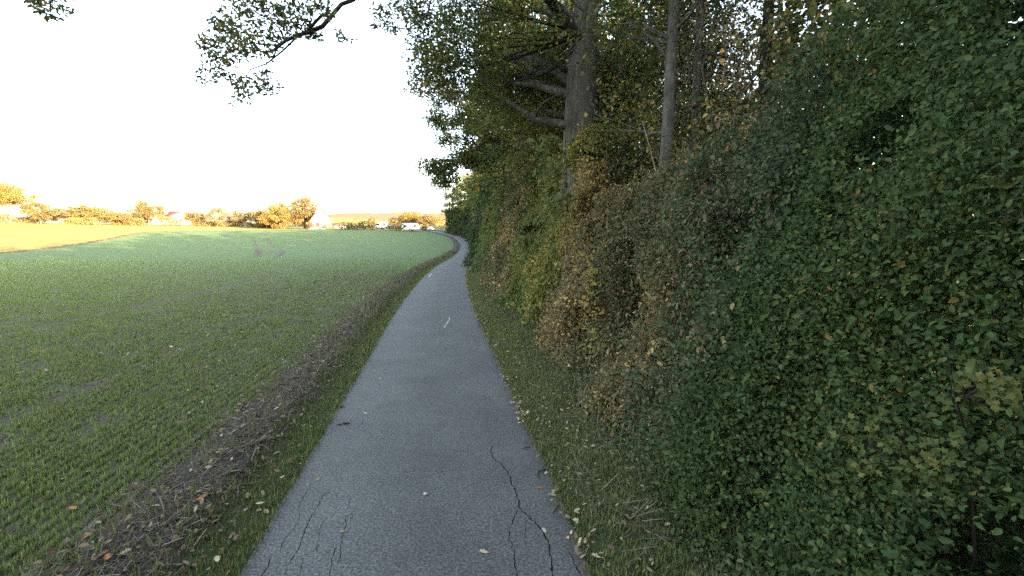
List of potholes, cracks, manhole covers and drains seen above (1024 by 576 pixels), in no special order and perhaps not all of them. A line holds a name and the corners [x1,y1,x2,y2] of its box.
crack [490,446,582,576]
crack [261,483,355,576]
